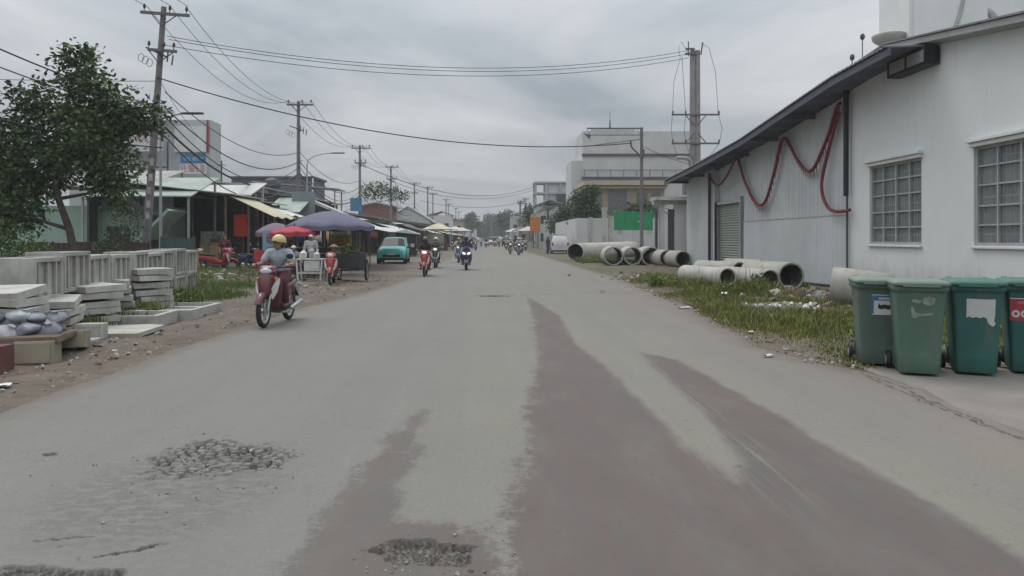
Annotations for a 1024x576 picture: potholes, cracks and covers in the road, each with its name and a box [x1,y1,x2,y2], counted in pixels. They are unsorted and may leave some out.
crack [13,529,183,564]
pothole [334,529,515,576]
crack [851,371,1024,445]
pothole [0,555,164,576]
